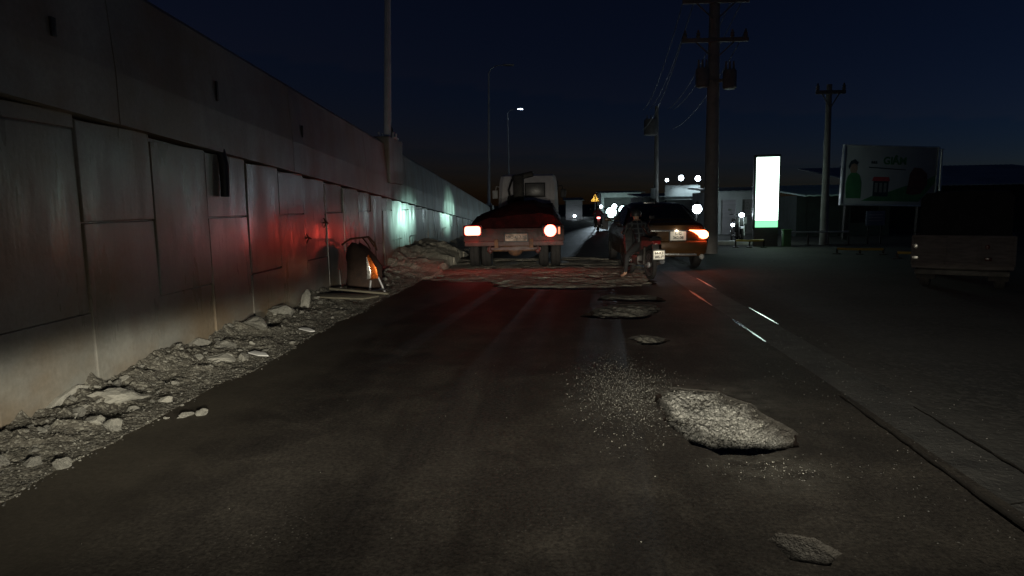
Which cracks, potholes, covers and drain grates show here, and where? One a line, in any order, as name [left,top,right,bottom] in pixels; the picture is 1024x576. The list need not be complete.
pothole [581,304,660,320]
pothole [768,532,843,566]
pothole [654,387,799,456]
pothole [627,335,671,345]
